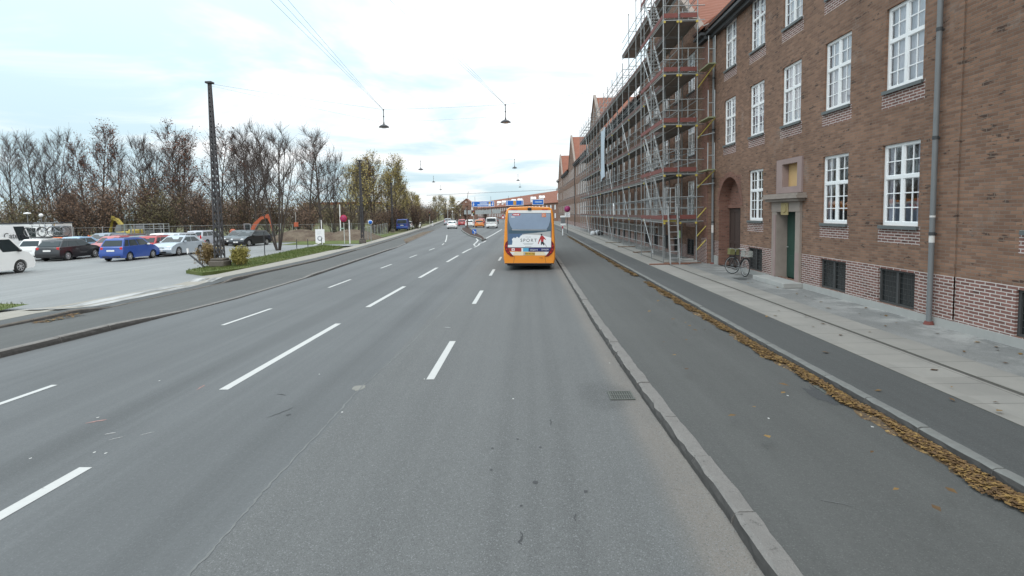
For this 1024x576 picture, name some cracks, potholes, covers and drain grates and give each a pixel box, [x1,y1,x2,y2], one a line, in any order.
drain grate [607,391,636,400]
